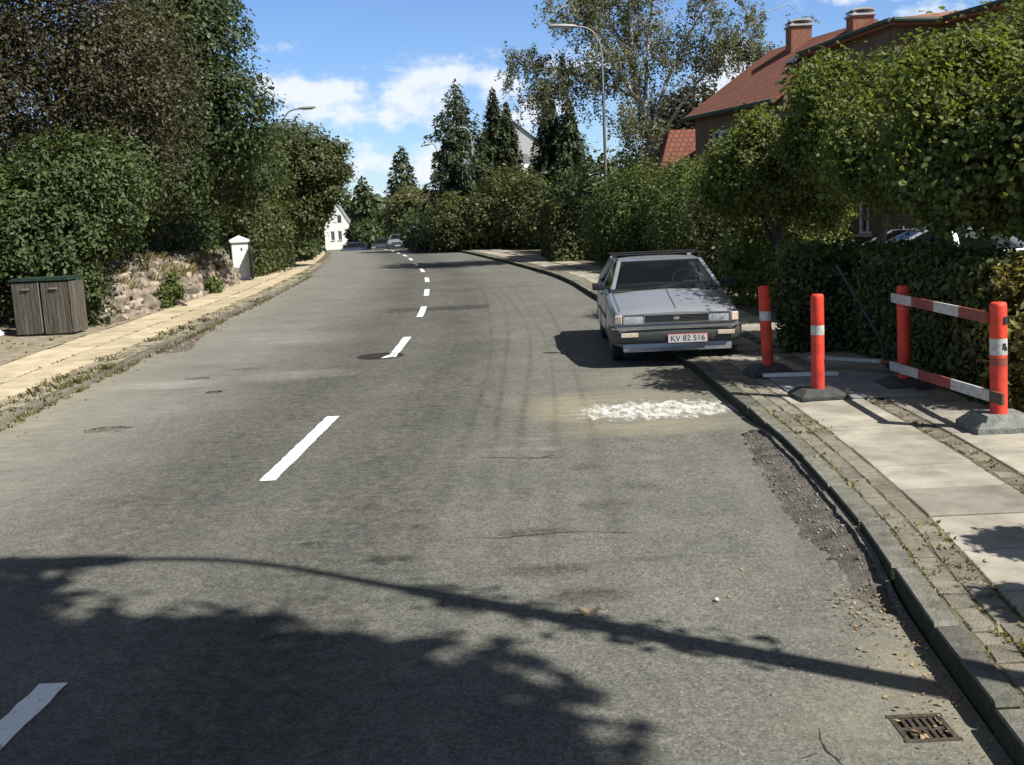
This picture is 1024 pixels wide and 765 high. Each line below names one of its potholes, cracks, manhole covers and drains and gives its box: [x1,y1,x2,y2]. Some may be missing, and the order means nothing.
crack [802,727,843,765]
drain grate [885,713,964,743]
pothole [740,429,900,616]
